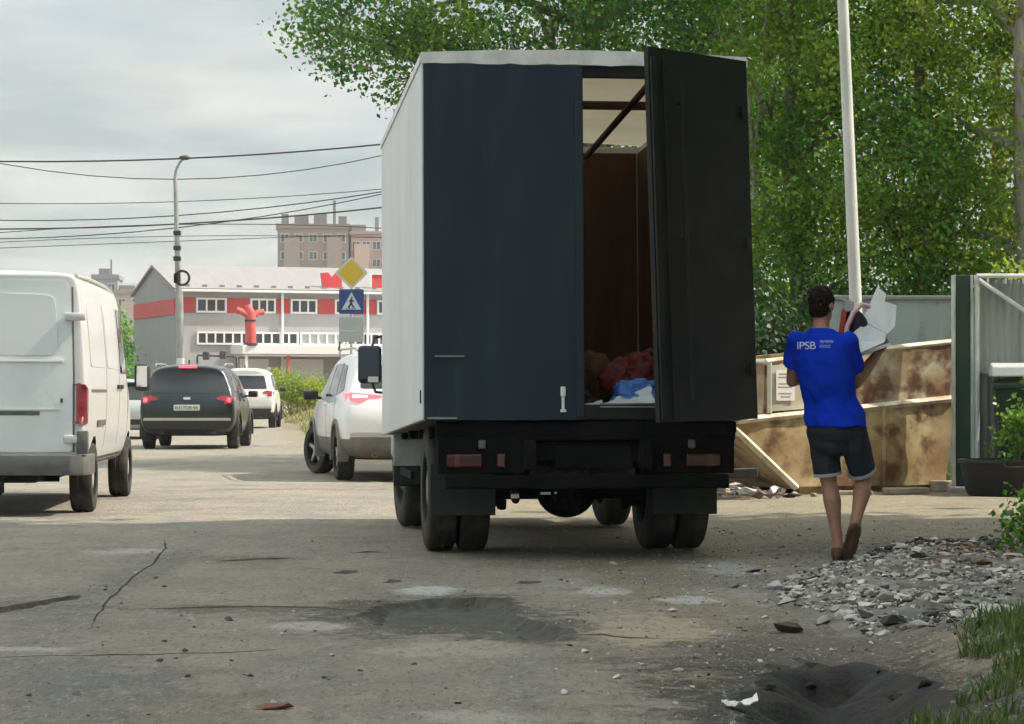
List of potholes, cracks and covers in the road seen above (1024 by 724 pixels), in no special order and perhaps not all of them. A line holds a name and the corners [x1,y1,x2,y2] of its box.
crack [89,540,359,629]
crack [0,648,289,658]
pothole [355,597,579,641]
